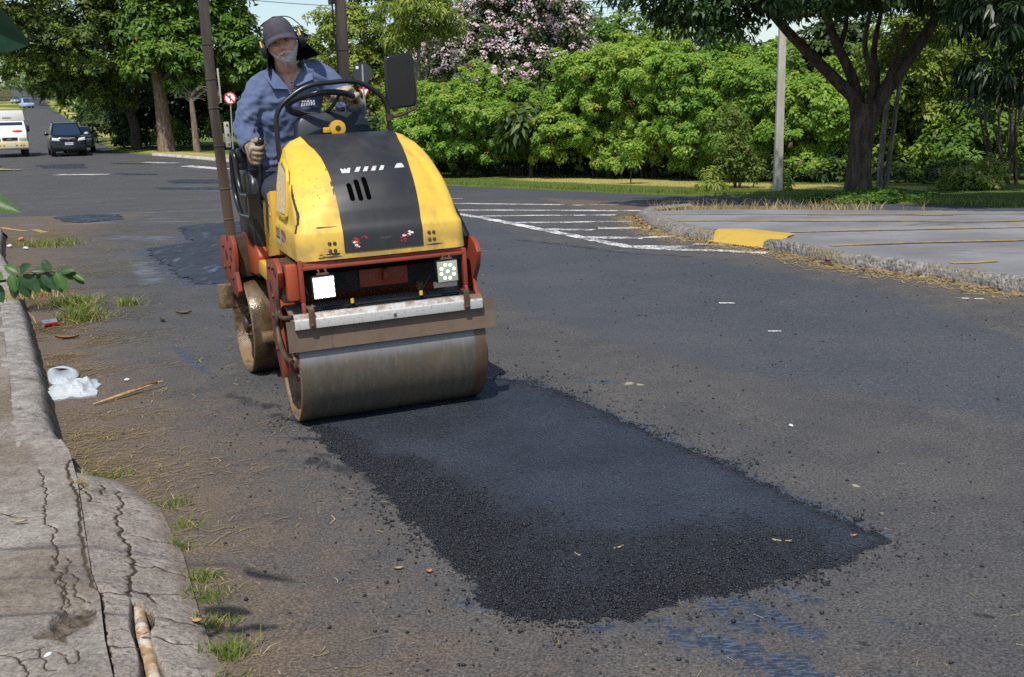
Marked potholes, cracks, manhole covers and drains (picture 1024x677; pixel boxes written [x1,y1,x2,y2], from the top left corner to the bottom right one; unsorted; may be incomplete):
crack [1,473,196,674]
